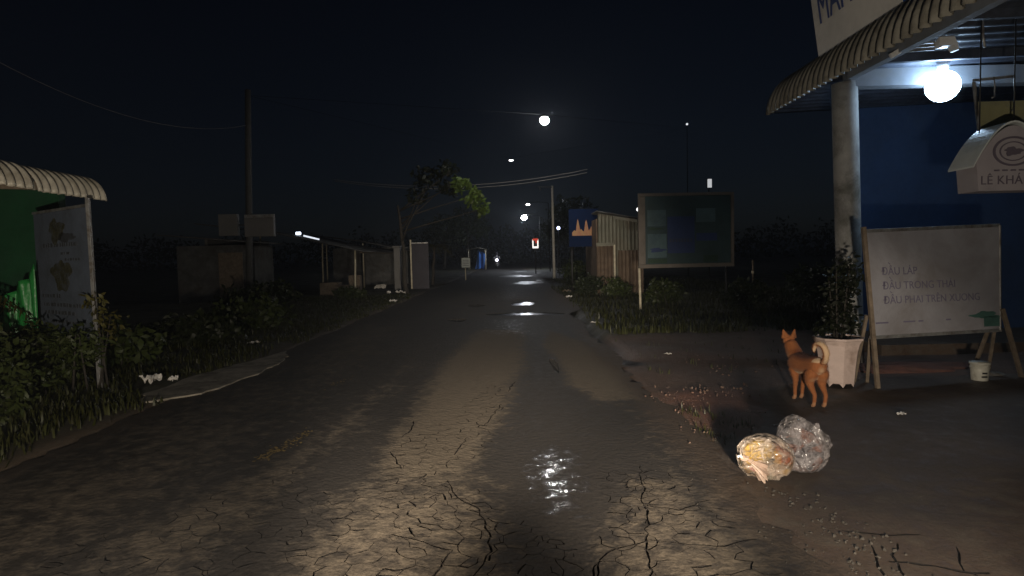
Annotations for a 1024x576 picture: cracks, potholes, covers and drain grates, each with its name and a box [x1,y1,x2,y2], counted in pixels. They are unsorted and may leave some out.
crack [285,382,777,576]
crack [845,531,988,576]
crack [42,473,308,576]
